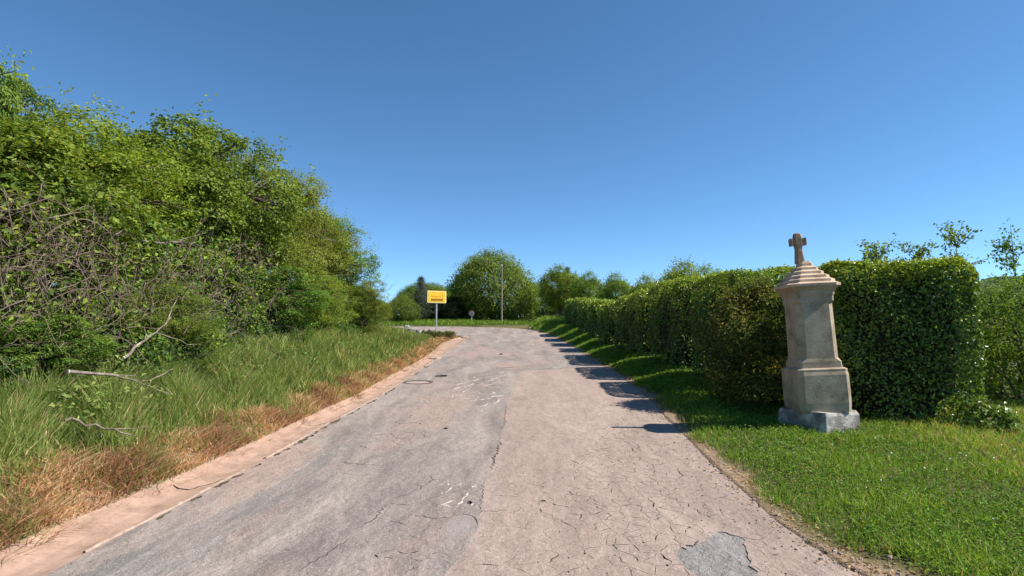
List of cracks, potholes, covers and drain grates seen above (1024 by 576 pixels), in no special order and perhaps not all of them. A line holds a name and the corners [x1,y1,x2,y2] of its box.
crack [302,475,478,569]
crack [481,422,800,576]
crack [344,415,426,501]
